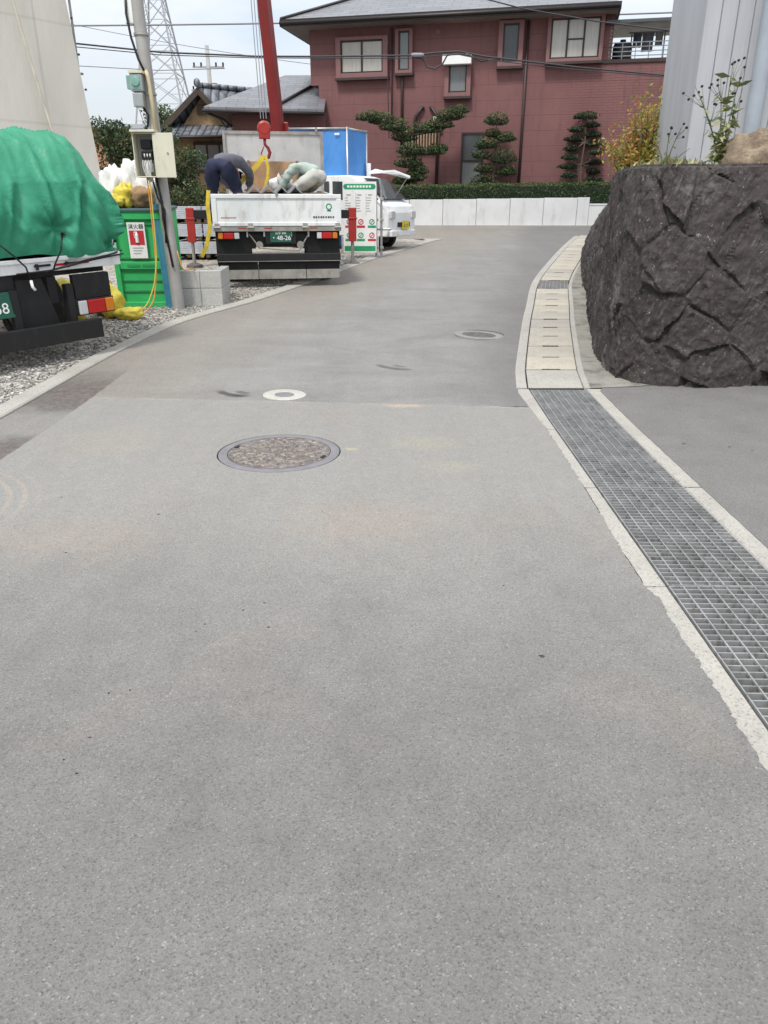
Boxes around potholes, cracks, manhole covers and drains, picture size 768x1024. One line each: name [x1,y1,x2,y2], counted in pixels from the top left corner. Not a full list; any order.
manhole cover [454,330,504,340]
drain grate [537,281,568,289]
drain grate [530,390,623,432]
drain grate [598,487,768,589]
drain grate [668,586,768,730]
manhole cover [218,435,340,472]
drain grate [557,429,684,490]
manhole cover [263,389,306,400]
